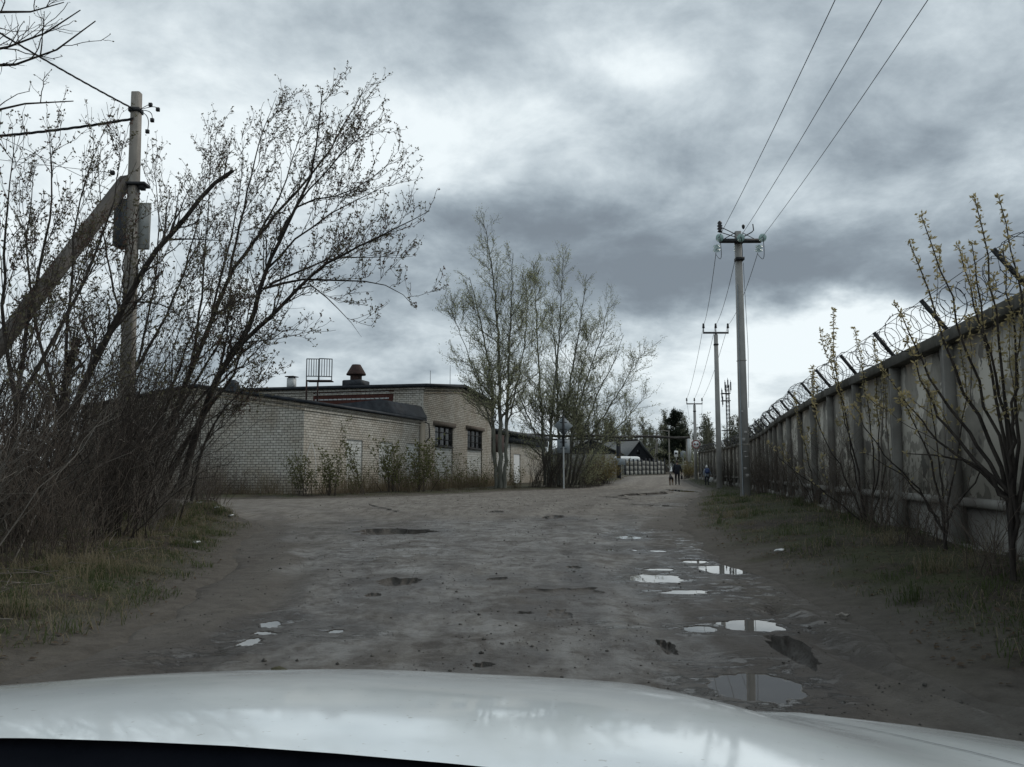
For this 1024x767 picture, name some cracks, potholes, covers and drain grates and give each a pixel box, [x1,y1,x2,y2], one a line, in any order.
pothole [697,565,749,575]
pothole [259,620,284,628]
pothole [714,619,787,632]
pothole [763,634,823,671]
pothole [655,639,678,655]
pothole [376,577,423,586]
pothole [629,574,685,583]
pothole [235,637,262,646]
pothole [704,672,810,704]
